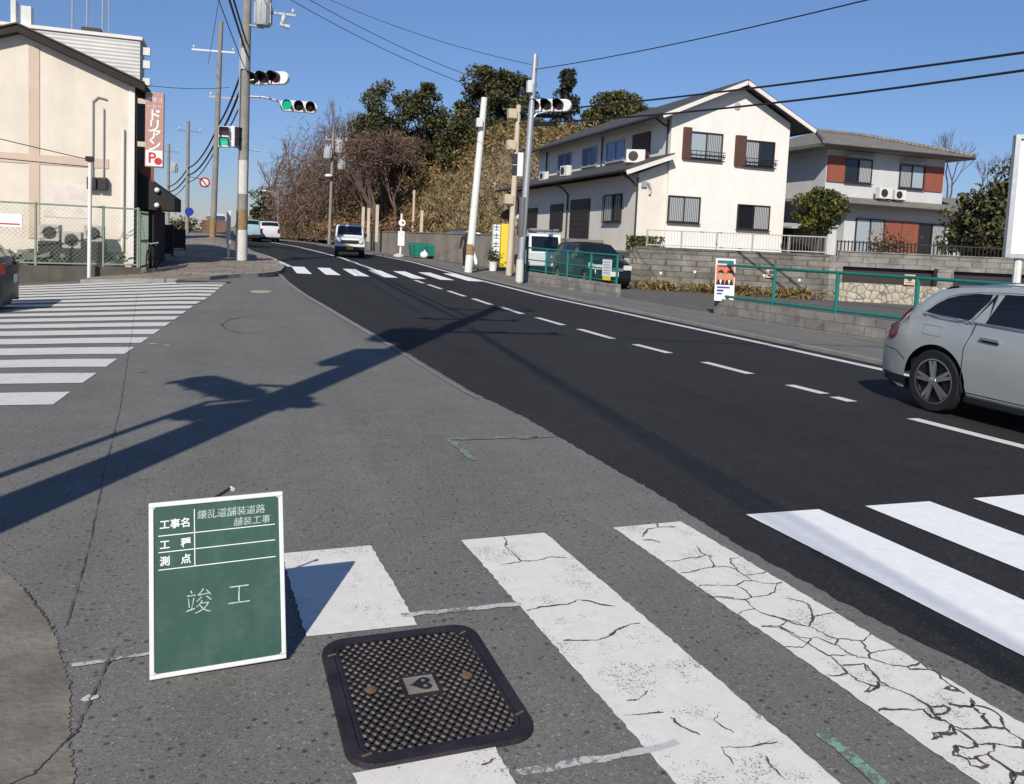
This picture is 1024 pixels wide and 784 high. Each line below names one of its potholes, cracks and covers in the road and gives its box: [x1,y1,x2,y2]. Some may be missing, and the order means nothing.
crack [564,623,638,641]
crack [529,600,613,610]
crack [665,548,1024,784]
manhole cover [322,625,534,770]
crack [502,536,567,565]
crack [626,690,784,778]
